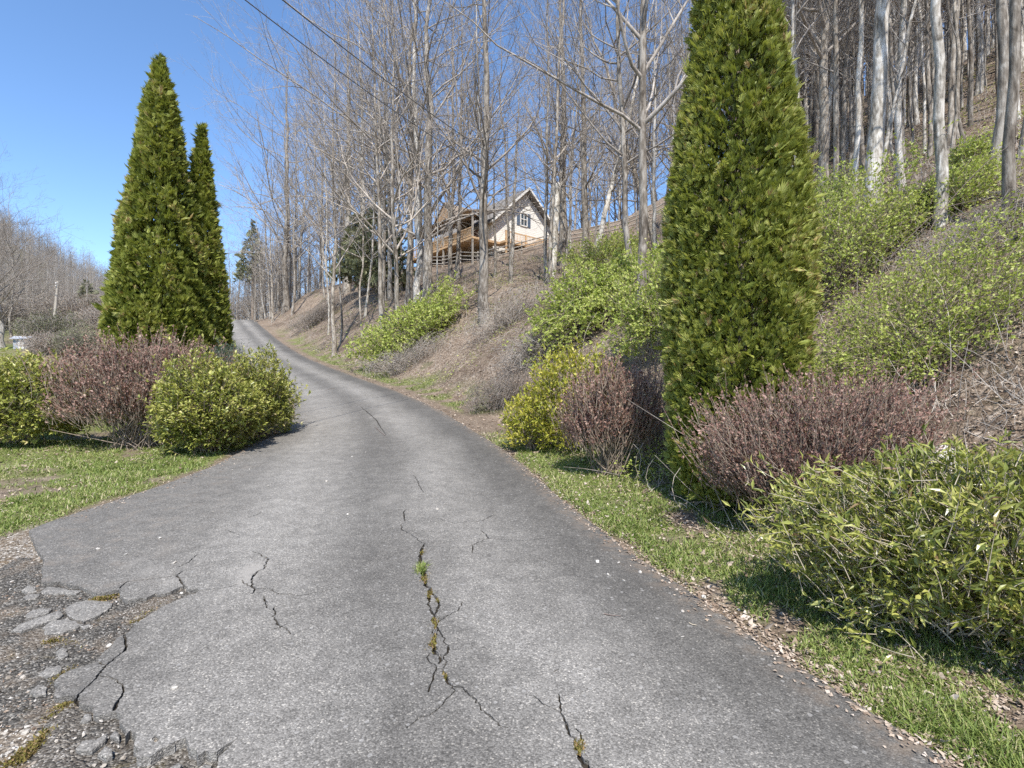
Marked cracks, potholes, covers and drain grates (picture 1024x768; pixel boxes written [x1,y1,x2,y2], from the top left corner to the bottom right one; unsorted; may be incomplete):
crack [74,637,128,711]
crack [559,697,589,768]
crack [418,546,499,726]
pothole [0,557,197,729]
